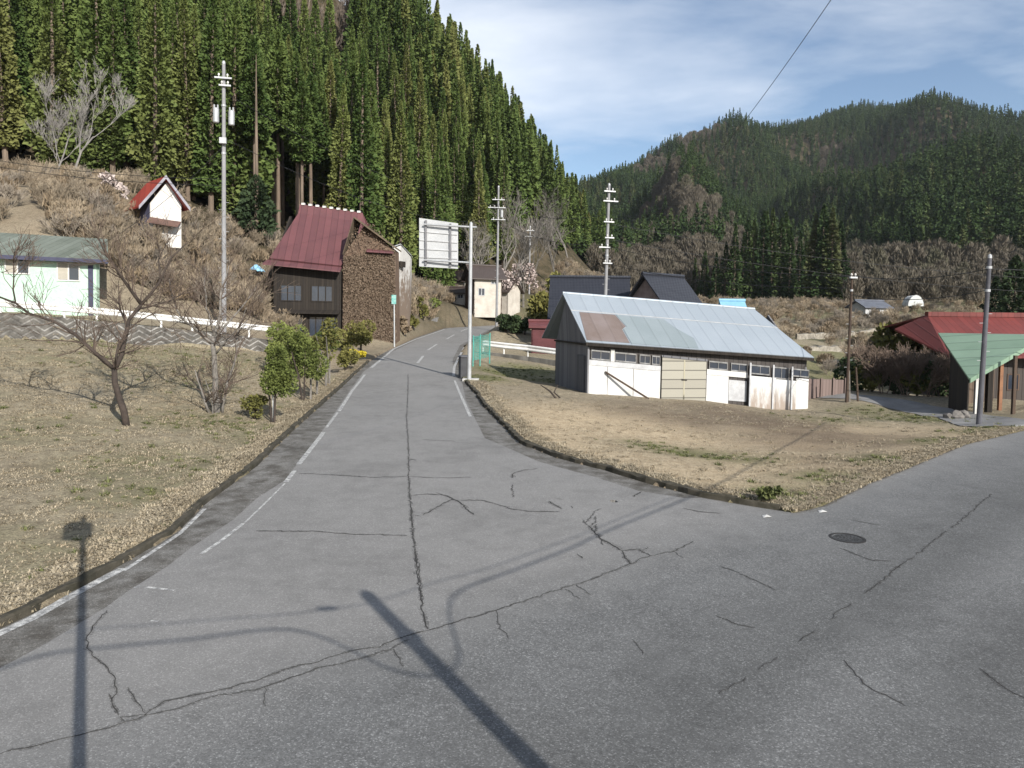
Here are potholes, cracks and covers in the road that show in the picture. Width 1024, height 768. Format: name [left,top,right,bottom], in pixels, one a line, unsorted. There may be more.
crack [0,541,693,754]
crack [309,440,651,564]
manhole cover [829,533,866,544]
